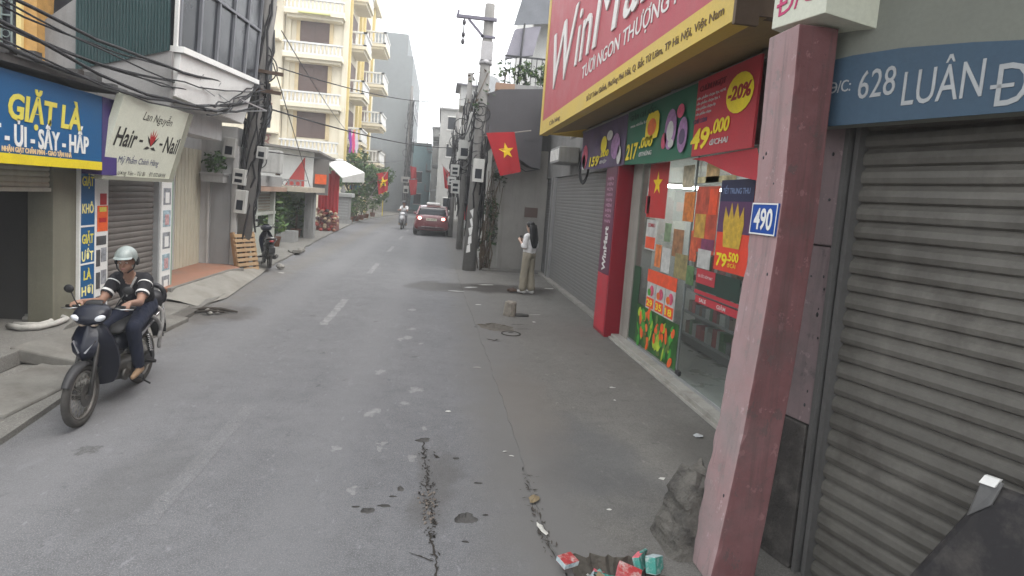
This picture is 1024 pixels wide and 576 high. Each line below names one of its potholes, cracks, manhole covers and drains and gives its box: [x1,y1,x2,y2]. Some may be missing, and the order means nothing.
crack [520,467,558,557]
pothole [562,553,665,576]
crack [409,441,440,576]
pothole [454,512,478,523]
